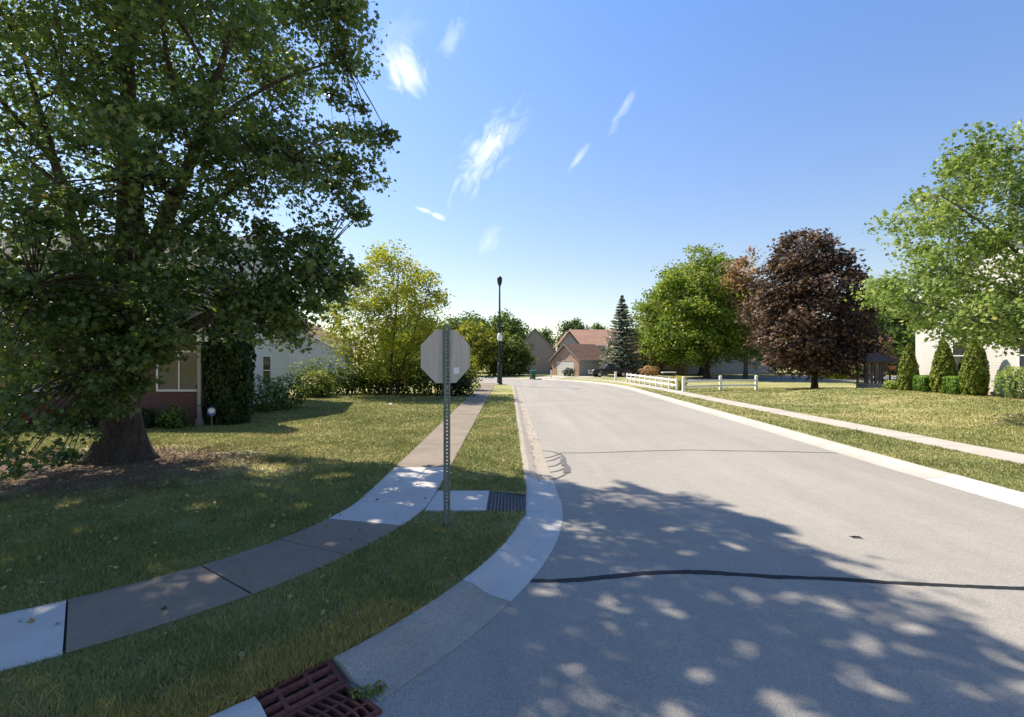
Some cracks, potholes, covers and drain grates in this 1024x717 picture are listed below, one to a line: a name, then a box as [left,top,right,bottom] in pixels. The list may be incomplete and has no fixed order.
drain grate [242,658,382,717]
